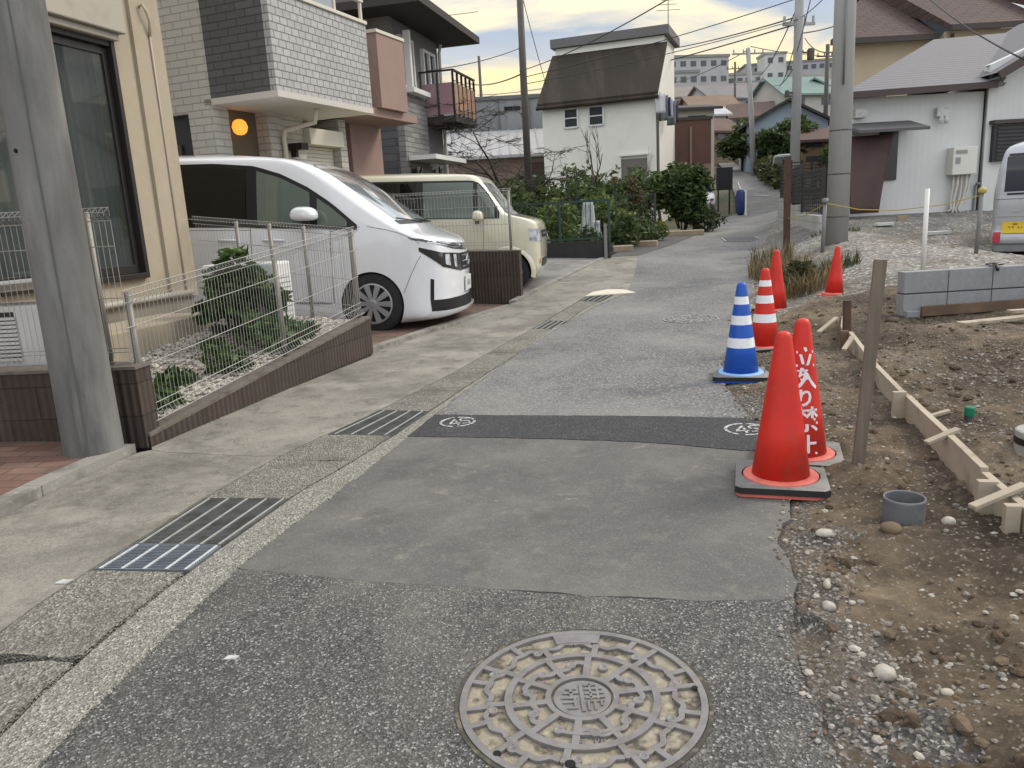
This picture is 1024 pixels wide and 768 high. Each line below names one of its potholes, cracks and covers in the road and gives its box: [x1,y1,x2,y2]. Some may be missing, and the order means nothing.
drain grate [329,410,429,437]
drain grate [135,498,288,547]
manhole cover [455,629,714,768]
drain grate [95,544,222,576]
drain grate [533,320,567,329]
manhole cover [663,315,719,323]
